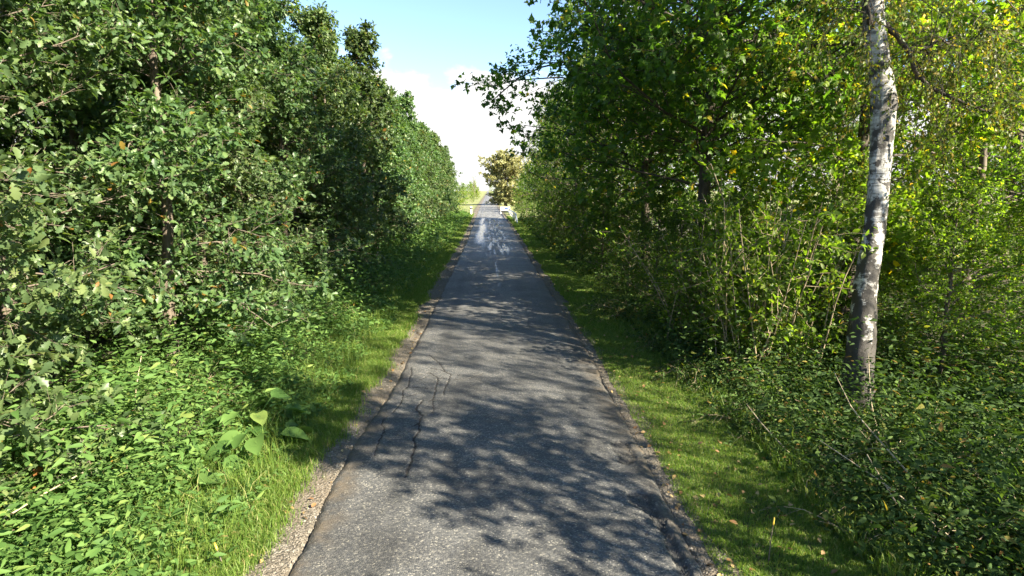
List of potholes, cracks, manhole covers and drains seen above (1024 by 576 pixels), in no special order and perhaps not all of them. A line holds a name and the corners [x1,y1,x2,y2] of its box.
crack [374,356,481,478]
